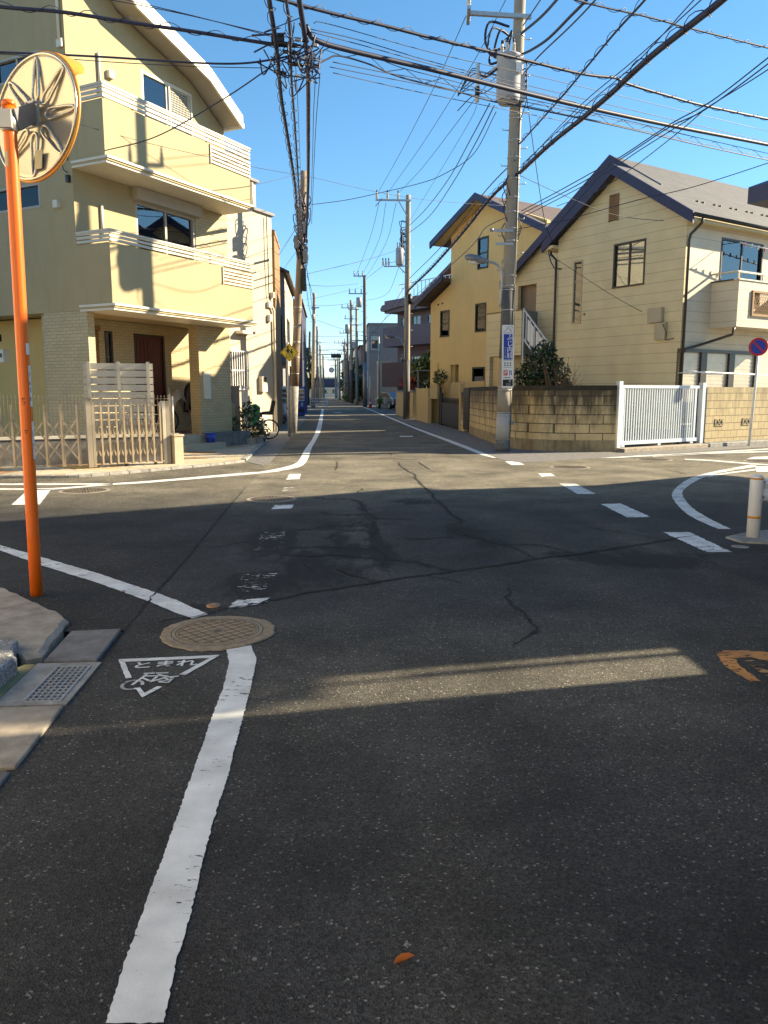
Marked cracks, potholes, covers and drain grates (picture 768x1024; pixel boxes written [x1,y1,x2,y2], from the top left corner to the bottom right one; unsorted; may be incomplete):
manhole cover [160,616,275,651]
drain grate [0,662,102,707]
crack [503,587,539,645]
crack [159,454,715,622]
